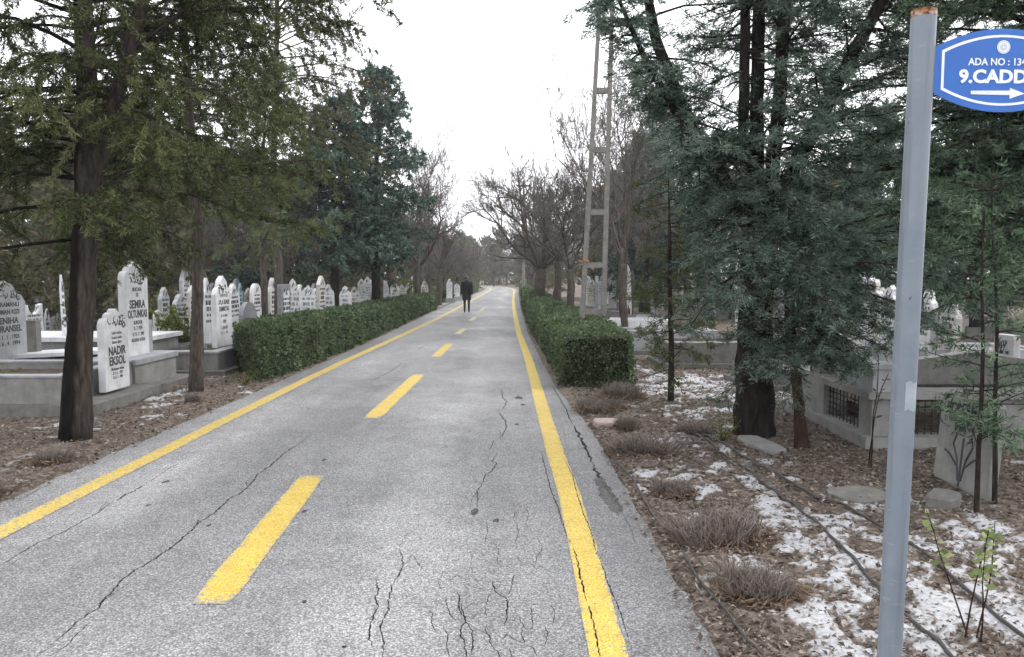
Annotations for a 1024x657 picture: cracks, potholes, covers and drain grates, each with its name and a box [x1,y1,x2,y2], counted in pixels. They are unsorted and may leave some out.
crack [470,391,507,506]
crack [422,503,556,657]
crack [0,462,181,572]
crack [368,533,427,657]
crack [36,436,309,657]
